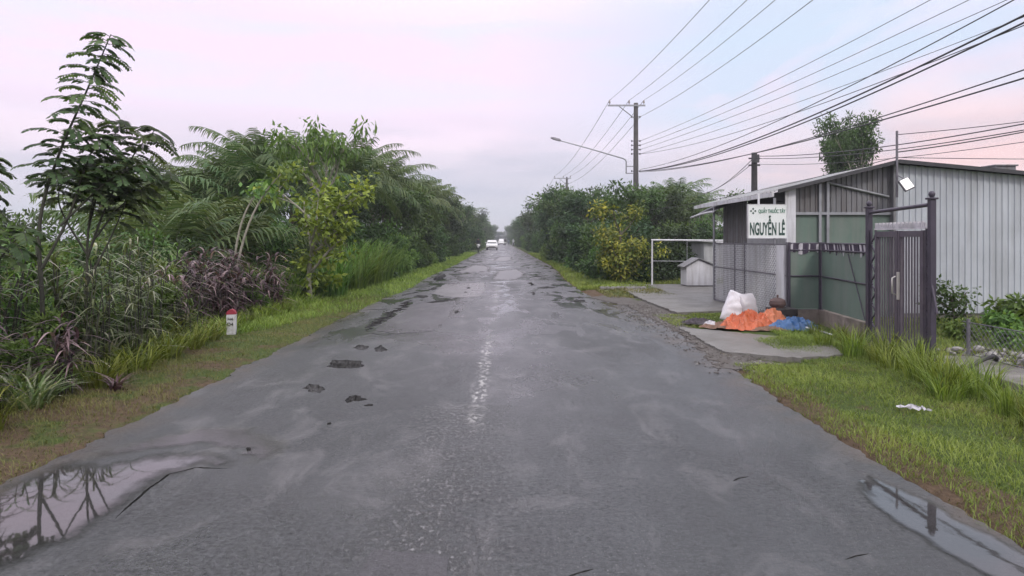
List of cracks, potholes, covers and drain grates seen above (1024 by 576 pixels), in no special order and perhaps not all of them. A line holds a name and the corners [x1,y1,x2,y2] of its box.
crack [115,467,226,519]
pothole [327,360,364,369]
pothole [302,384,325,393]
